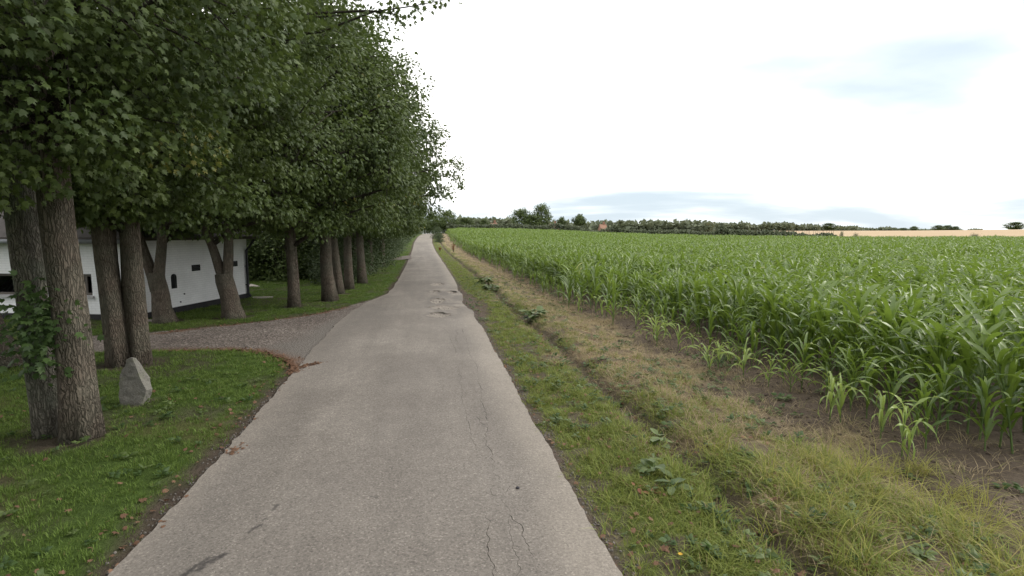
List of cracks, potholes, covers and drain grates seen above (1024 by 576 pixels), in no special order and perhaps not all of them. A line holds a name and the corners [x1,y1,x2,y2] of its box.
crack [446,328,538,576]
